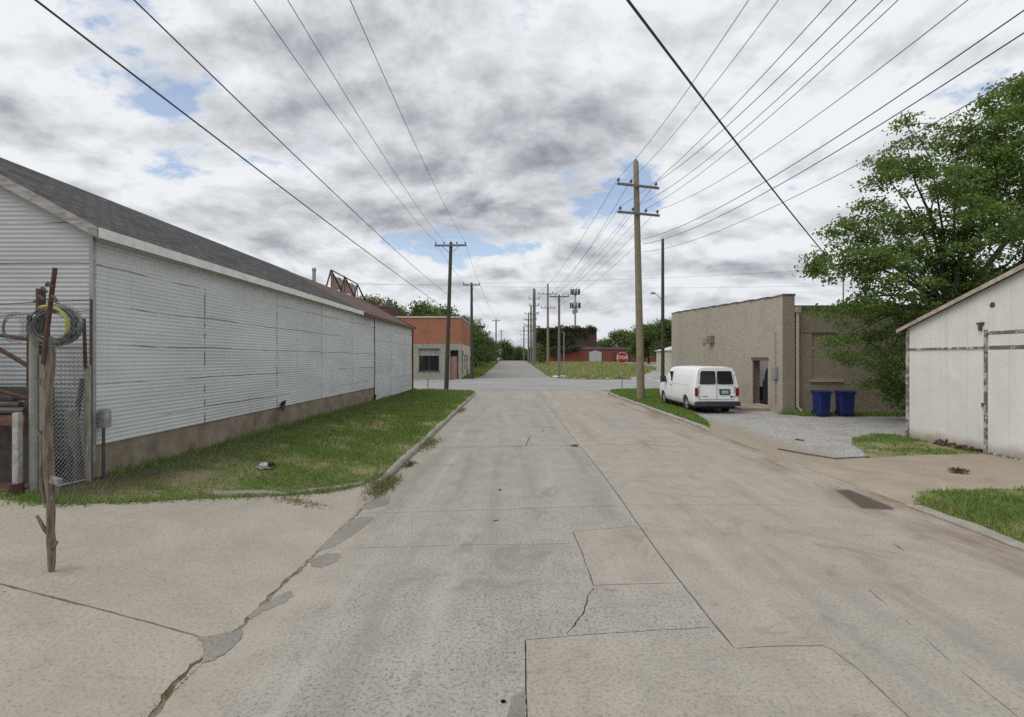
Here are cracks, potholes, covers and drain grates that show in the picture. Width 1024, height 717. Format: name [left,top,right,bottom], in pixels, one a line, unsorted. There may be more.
crack [148,495,379,717]
